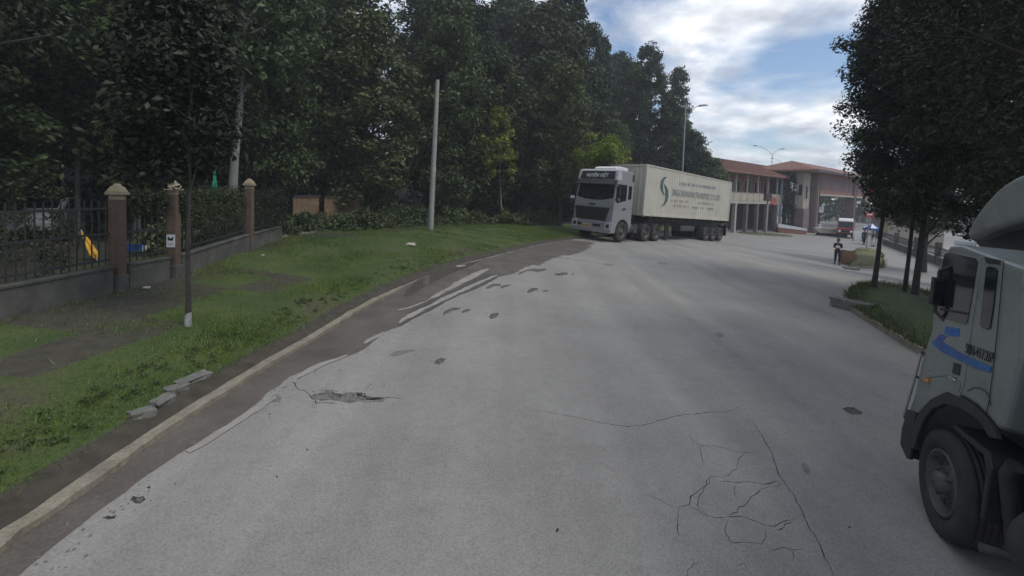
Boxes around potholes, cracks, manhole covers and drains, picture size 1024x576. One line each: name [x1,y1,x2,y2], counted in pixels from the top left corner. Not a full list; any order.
crack [524,407,738,427]
crack [652,445,802,562]
pothole [310,391,385,403]
